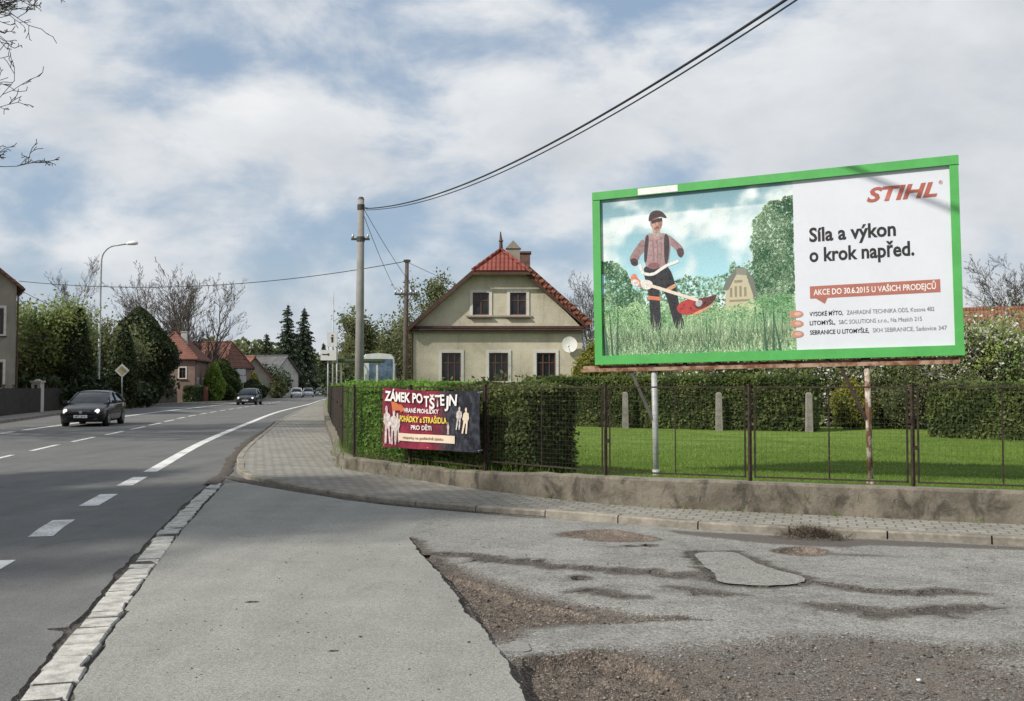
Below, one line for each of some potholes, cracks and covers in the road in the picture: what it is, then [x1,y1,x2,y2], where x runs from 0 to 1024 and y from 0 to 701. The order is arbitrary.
crack [410,537,1002,619]
pothole [441,573,598,634]
pothole [559,530,659,542]
pothole [519,650,690,701]
pothole [771,547,827,556]
